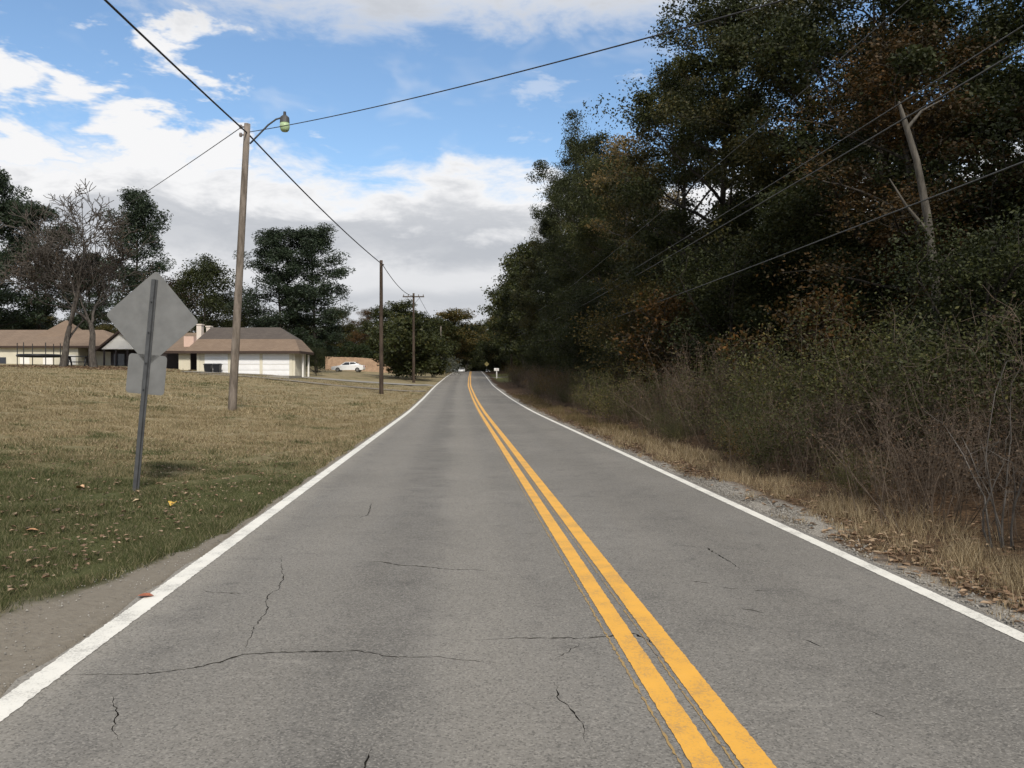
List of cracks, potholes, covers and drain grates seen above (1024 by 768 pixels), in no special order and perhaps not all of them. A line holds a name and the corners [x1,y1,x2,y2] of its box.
crack [75,560,480,675]
crack [507,633,653,657]
crack [554,683,586,743]
